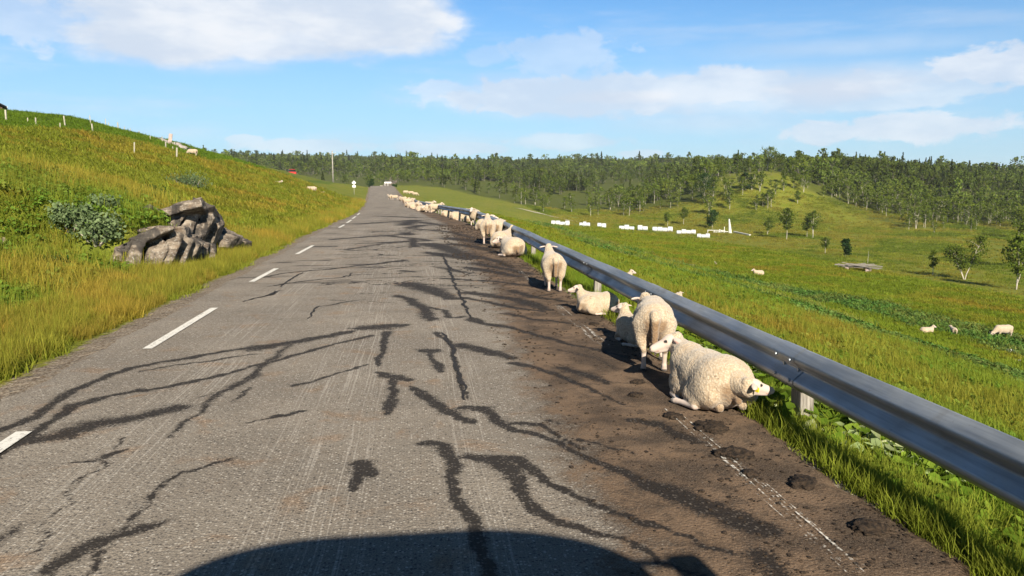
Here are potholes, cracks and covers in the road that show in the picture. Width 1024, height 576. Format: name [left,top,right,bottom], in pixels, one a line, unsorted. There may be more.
crack [441,253,472,400]
crack [242,259,404,302]
